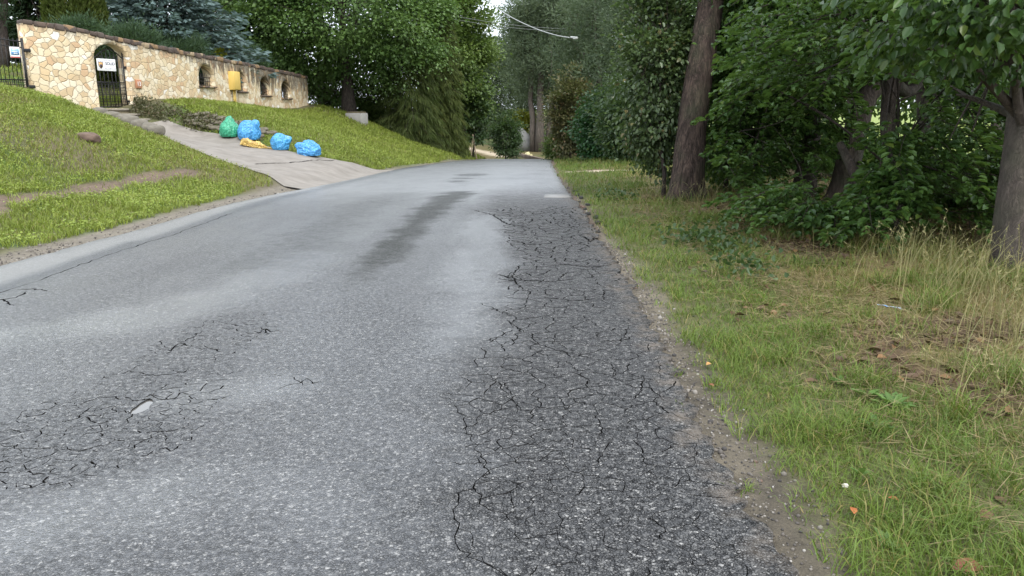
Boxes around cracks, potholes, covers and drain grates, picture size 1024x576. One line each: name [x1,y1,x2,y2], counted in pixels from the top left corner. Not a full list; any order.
pothole [130,399,153,416]
crack [0,289,47,306]
crack [0,314,275,490]
crack [435,206,748,576]
